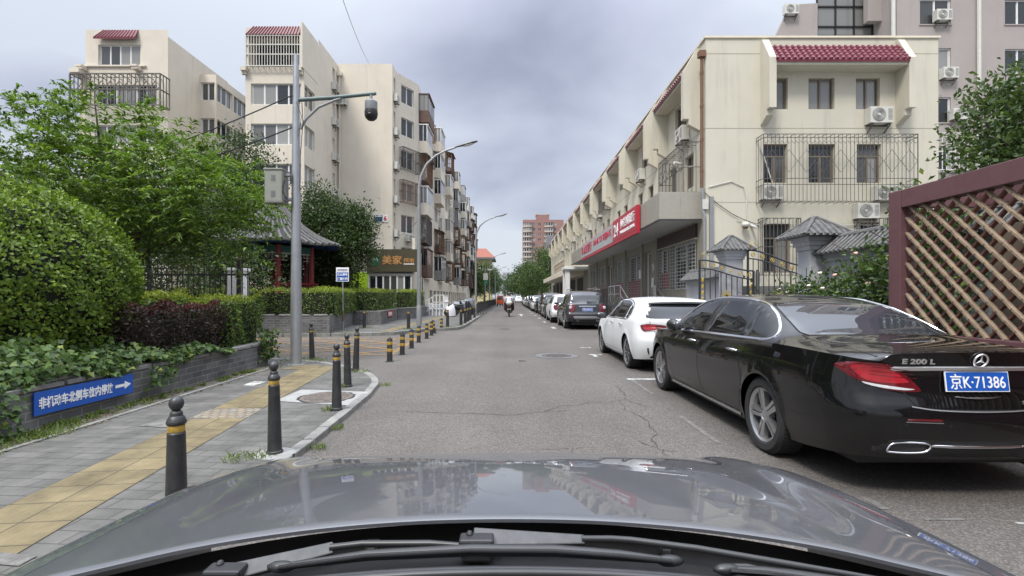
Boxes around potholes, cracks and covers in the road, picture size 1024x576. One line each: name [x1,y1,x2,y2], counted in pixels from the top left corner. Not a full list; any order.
crack [419,386,669,453]
manhole cover [280,389,369,405]
